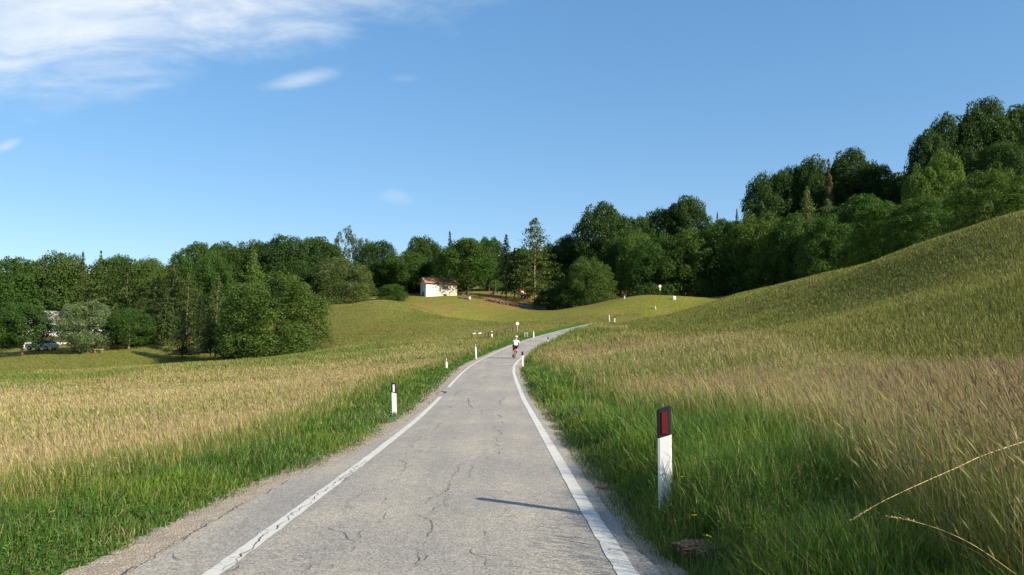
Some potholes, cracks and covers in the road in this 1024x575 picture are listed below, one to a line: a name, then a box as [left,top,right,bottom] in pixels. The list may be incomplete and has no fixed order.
crack [223,420,473,574]
